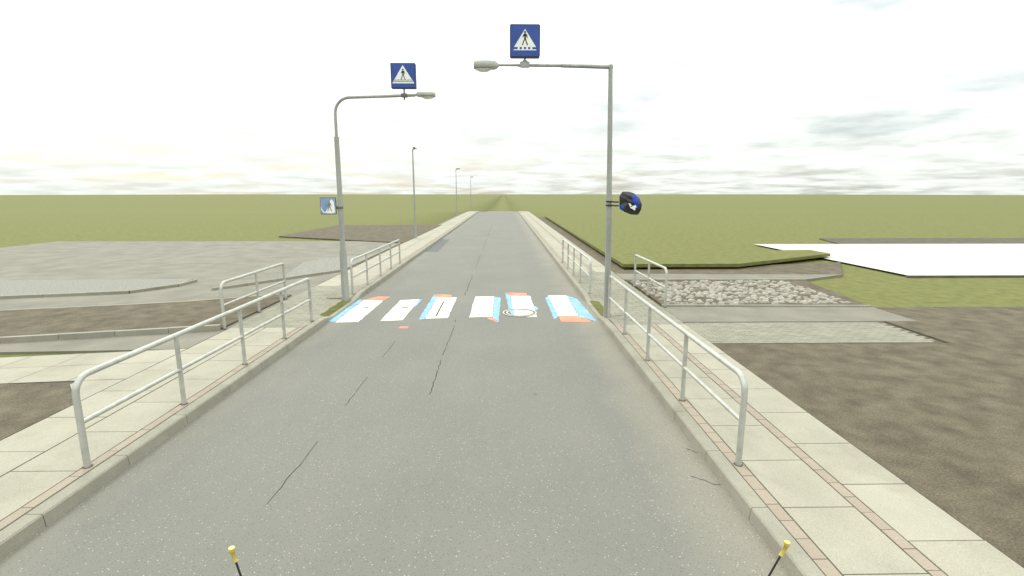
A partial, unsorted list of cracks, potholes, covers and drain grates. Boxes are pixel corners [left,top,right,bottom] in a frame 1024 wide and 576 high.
manhole cover [503,309,537,317]
crack [267,341,395,504]
